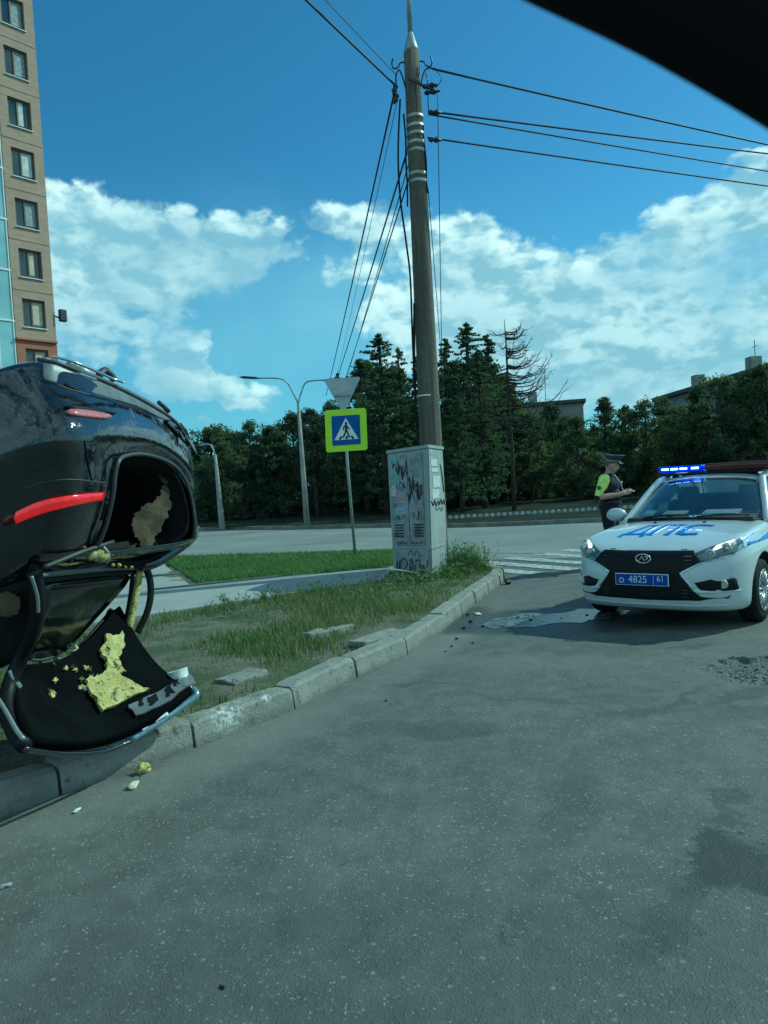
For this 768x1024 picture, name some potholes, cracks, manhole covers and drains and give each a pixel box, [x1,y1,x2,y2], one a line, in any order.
pothole [701,655,768,686]
